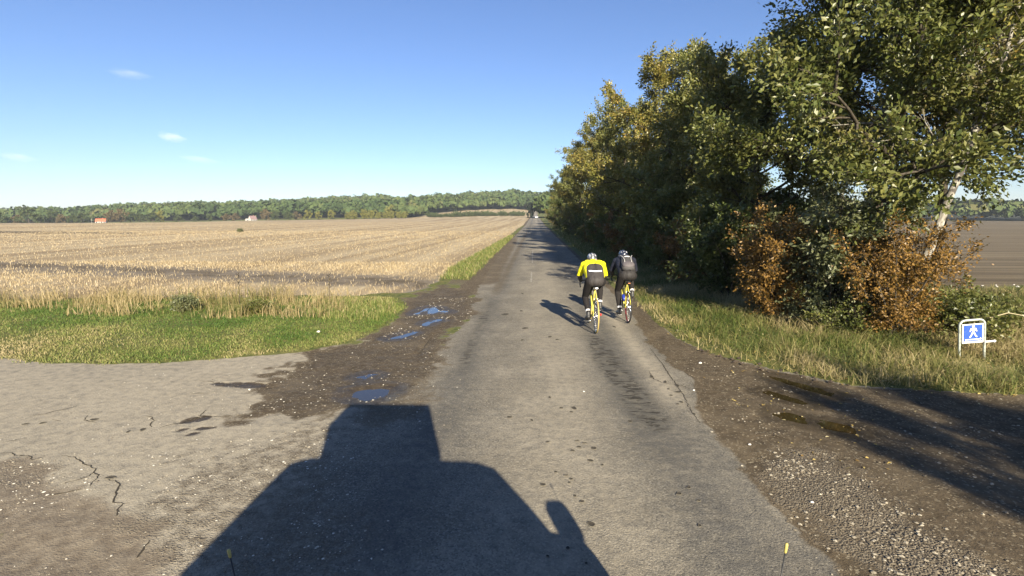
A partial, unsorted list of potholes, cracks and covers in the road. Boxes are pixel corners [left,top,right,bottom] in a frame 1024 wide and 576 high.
pothole [171,414,216,425]
crack [50,455,126,516]
